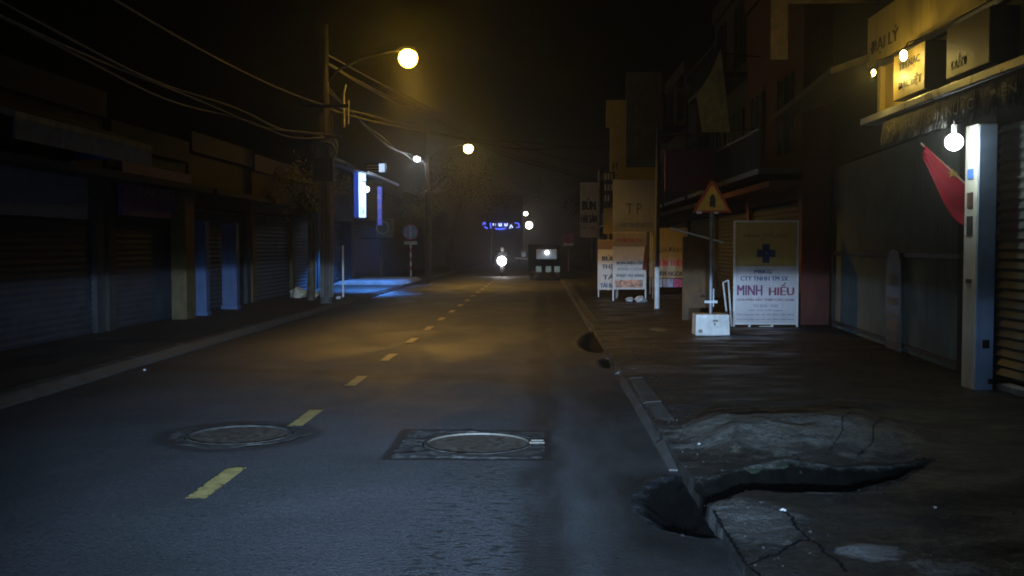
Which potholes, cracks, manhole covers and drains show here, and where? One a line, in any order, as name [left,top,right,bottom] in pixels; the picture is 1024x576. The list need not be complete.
crack [829,410,882,457]
manhole cover [174,423,312,449]
pothole [577,332,604,353]
pothole [630,475,721,539]
manhole cover [390,429,546,459]
pothole [692,457,937,518]
crack [712,510,848,576]
